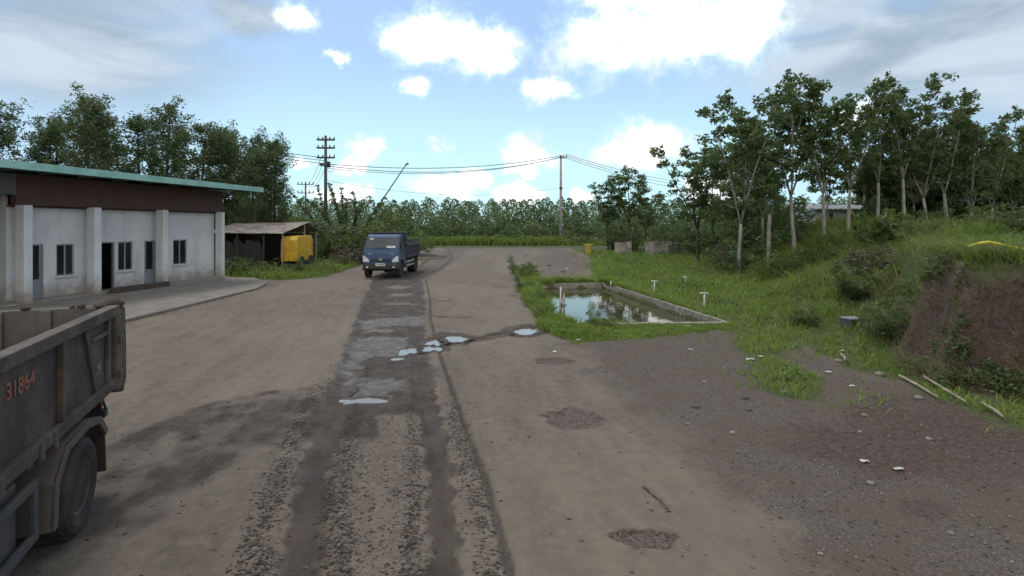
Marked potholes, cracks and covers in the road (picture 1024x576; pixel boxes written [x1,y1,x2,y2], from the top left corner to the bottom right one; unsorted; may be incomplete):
pothole [437,334,475,344]
crack [639,484,673,512]
pothole [598,526,688,553]
pothole [509,326,543,336]
pothole [419,346,445,354]
pothole [529,403,617,432]
pothole [530,356,582,366]
pothole [394,345,420,356]
crack [410,329,554,358]
pothole [422,337,450,347]
pothole [334,395,398,405]
